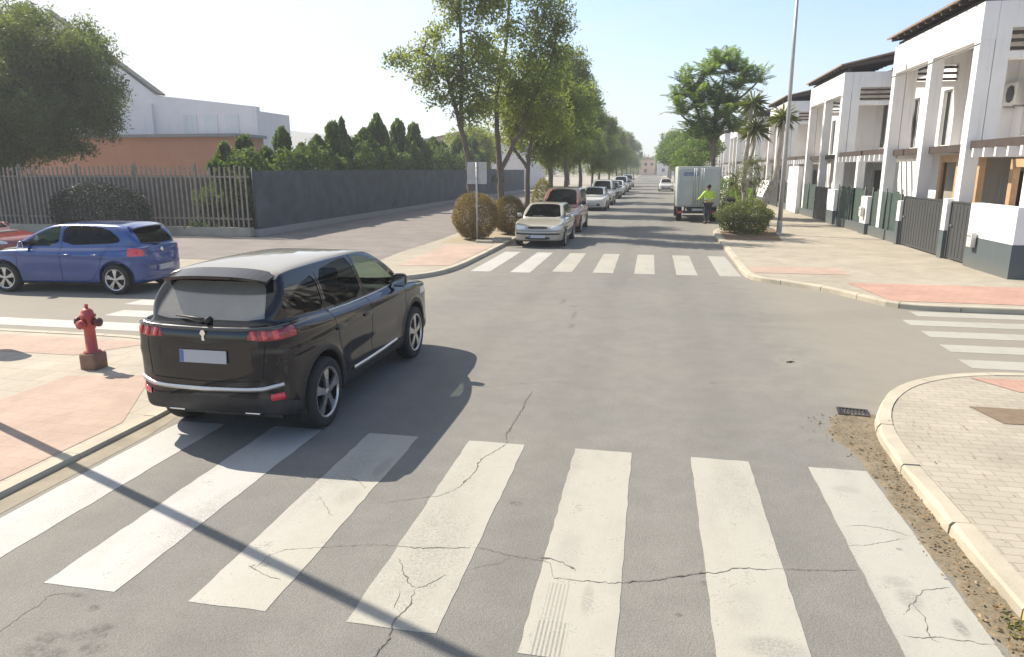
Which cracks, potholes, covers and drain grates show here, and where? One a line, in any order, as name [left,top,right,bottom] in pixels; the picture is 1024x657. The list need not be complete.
crack [255,544,859,657]
crack [903,587,980,644]
drain grate [836,406,870,417]
crack [389,395,530,502]
